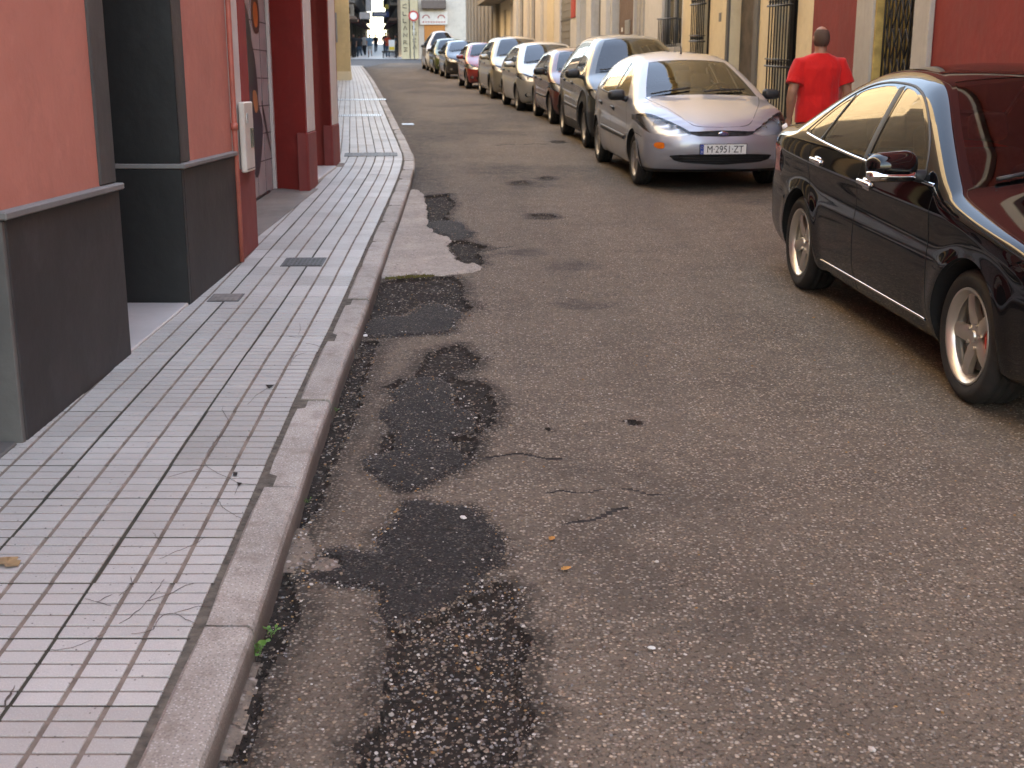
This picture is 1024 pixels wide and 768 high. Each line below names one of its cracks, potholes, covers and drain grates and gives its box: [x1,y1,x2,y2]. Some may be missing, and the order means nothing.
crack [473,453,563,461]
pothole [350,581,538,768]
crack [547,488,664,525]
crack [91,579,209,634]
crack [170,408,244,519]
